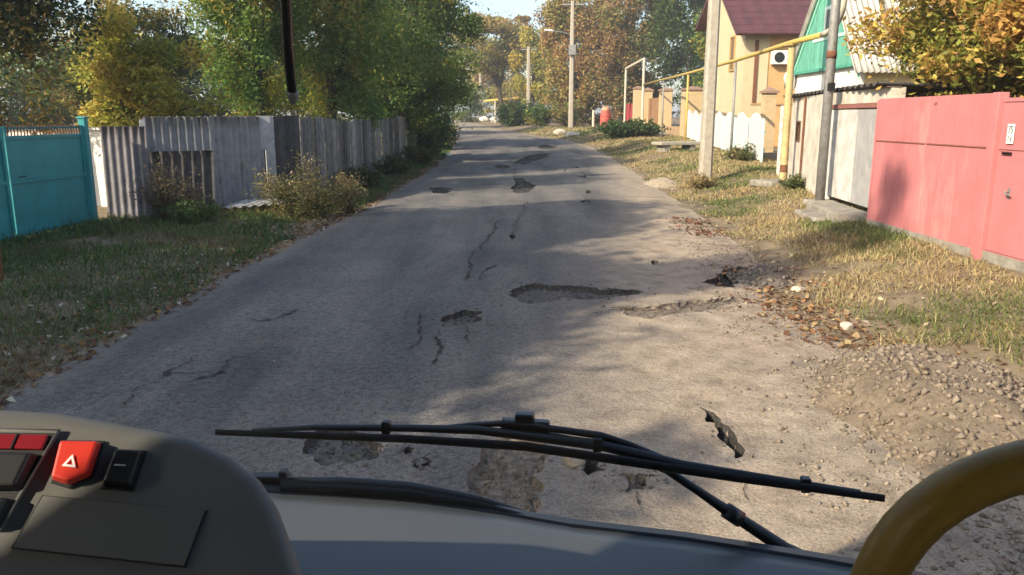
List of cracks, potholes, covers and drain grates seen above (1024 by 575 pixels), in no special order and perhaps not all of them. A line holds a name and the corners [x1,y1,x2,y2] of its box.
crack [106,355,247,412]
pothole [431,308,491,329]
pothole [604,295,760,322]
pothole [500,282,652,307]
pothole [289,422,405,472]
crack [407,314,443,363]
pothole [501,178,545,194]
pothole [690,403,759,465]
pothole [420,186,462,195]
pothole [504,153,561,165]
crack [465,201,529,281]
